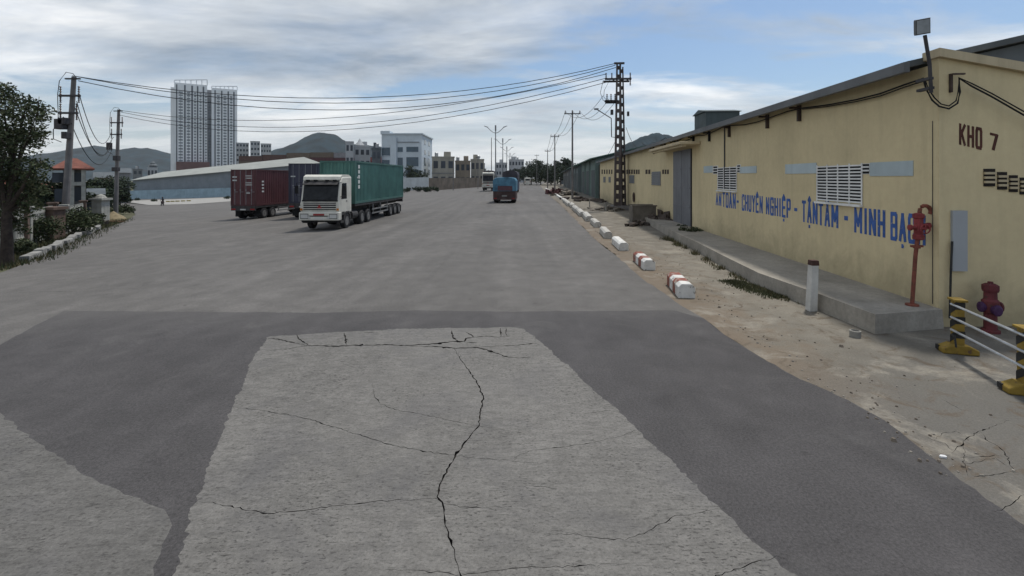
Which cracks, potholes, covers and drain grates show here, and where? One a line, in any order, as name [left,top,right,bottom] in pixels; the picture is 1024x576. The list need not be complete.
crack [937,420,1023,477]
crack [265,328,536,358]
crack [548,509,713,540]
crack [192,350,635,576]
